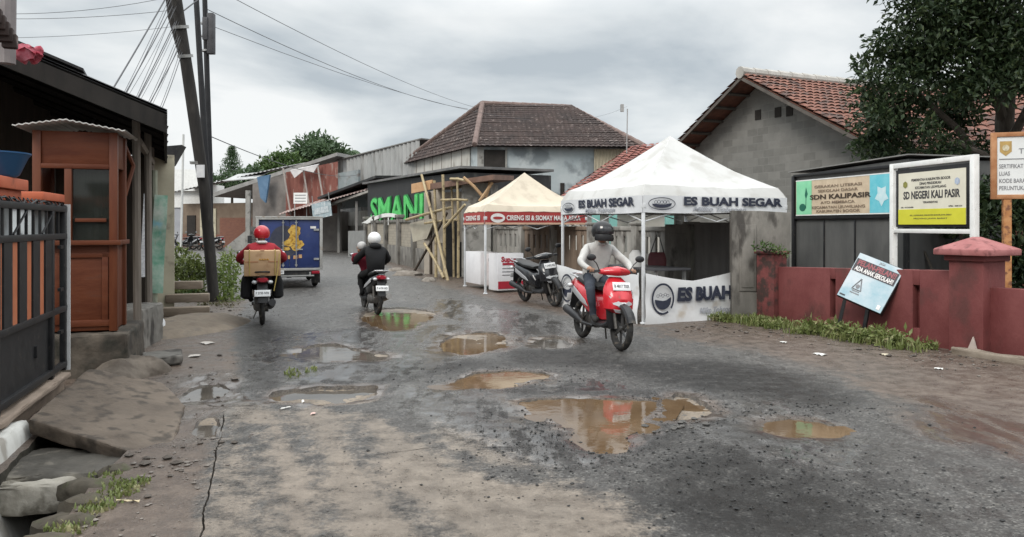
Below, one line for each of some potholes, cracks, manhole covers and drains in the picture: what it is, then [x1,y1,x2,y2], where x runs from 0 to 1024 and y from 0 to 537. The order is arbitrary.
pothole [427,370,551,390]
pothole [439,331,509,355]
pothole [525,337,573,349]
pothole [518,397,683,454]
pothole [182,384,230,401]
pothole [762,418,857,438]
crack [182,403,263,537]
pothole [293,343,390,363]
pothole [359,308,437,331]
pothole [269,385,378,405]
